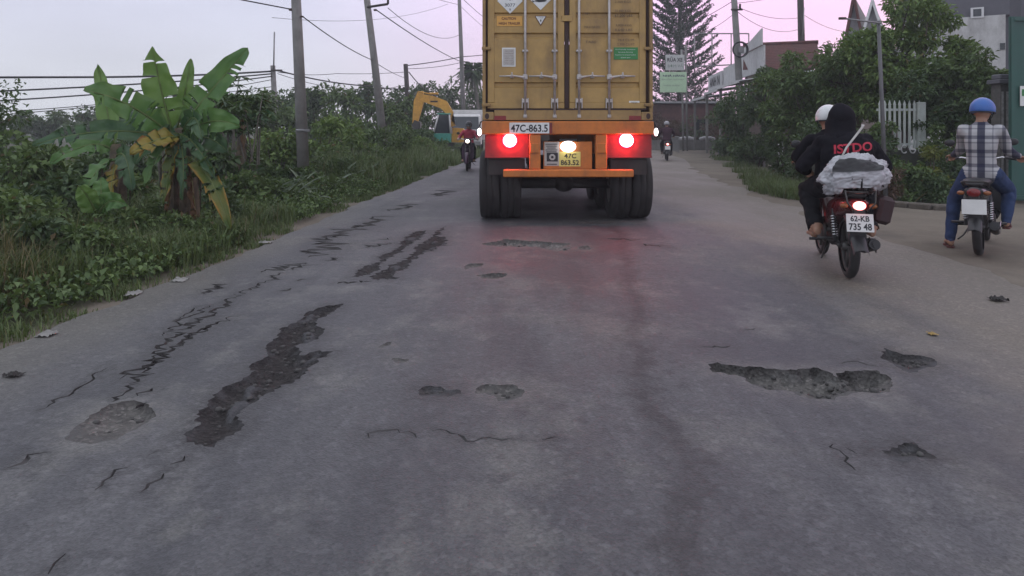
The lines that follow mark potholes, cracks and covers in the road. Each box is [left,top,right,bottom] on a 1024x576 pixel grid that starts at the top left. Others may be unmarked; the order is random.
crack [40,190,456,410]
pothole [882,442,937,463]
pothole [880,348,937,373]
crack [95,450,185,492]
pothole [64,400,156,444]
pothole [418,386,461,396]
pothole [475,384,525,401]
pothole [482,239,572,251]
pothole [708,362,893,400]
crack [829,444,857,469]
pothole [184,303,344,447]
pothole [369,227,448,280]
